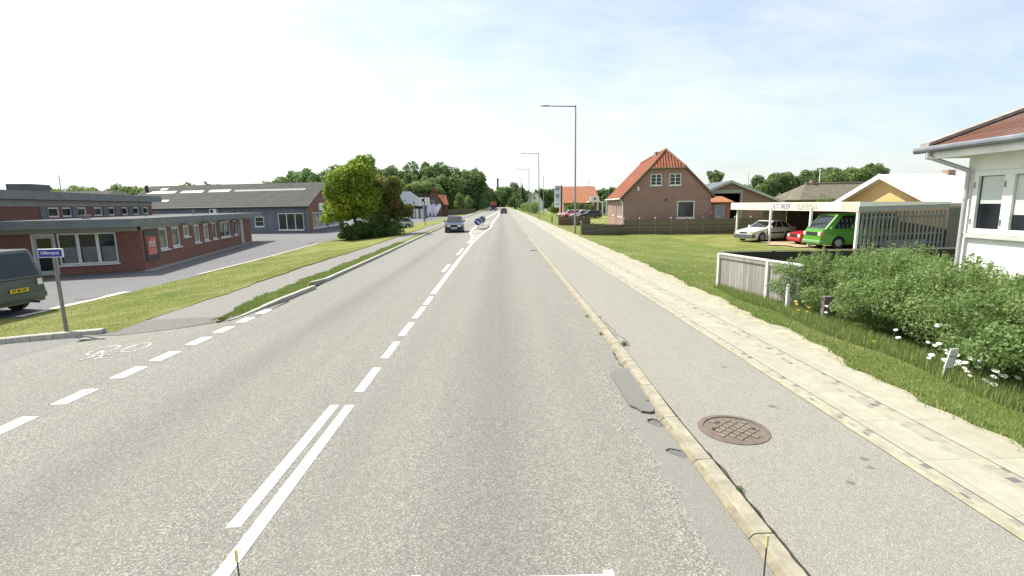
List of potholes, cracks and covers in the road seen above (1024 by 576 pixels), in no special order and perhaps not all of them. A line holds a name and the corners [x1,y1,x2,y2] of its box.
crack [708,452,811,576]
manhole cover [698,415,771,445]
pothole [665,448,687,459]
